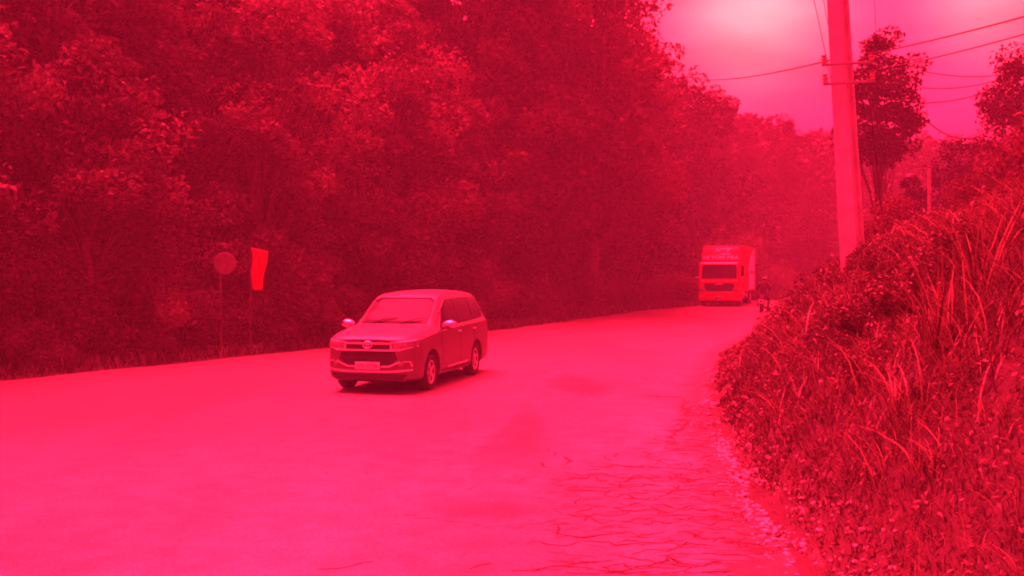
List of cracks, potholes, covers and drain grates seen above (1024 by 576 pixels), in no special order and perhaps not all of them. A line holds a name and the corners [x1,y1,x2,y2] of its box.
crack [515,379,826,576]
crack [318,561,373,570]
